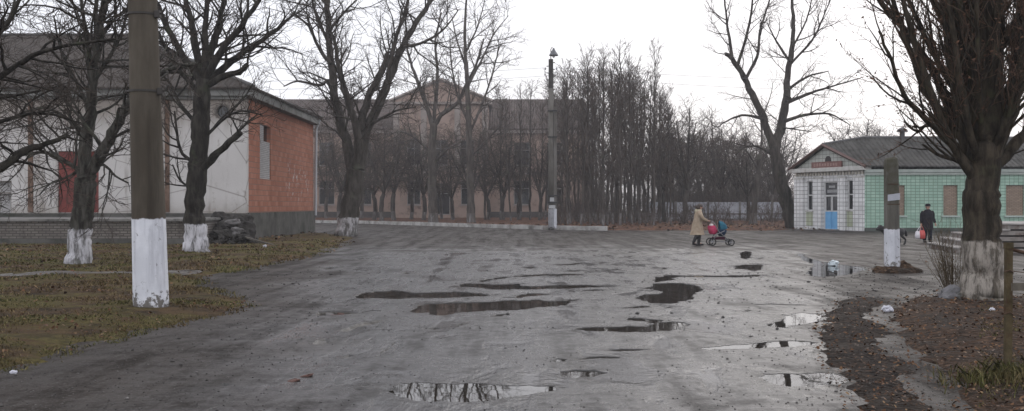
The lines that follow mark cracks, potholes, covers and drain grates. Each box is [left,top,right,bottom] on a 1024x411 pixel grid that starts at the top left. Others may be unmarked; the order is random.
pothole [702,341,818,350]
pothole [574,318,691,332]
pothole [757,372,851,387]
pothole [635,283,704,304]
pothole [354,290,489,299]
pothole [560,369,607,378]
pothole [797,254,866,277]
pothole [410,299,581,316]
pothole [389,382,556,402]
pothole [767,313,825,328]
